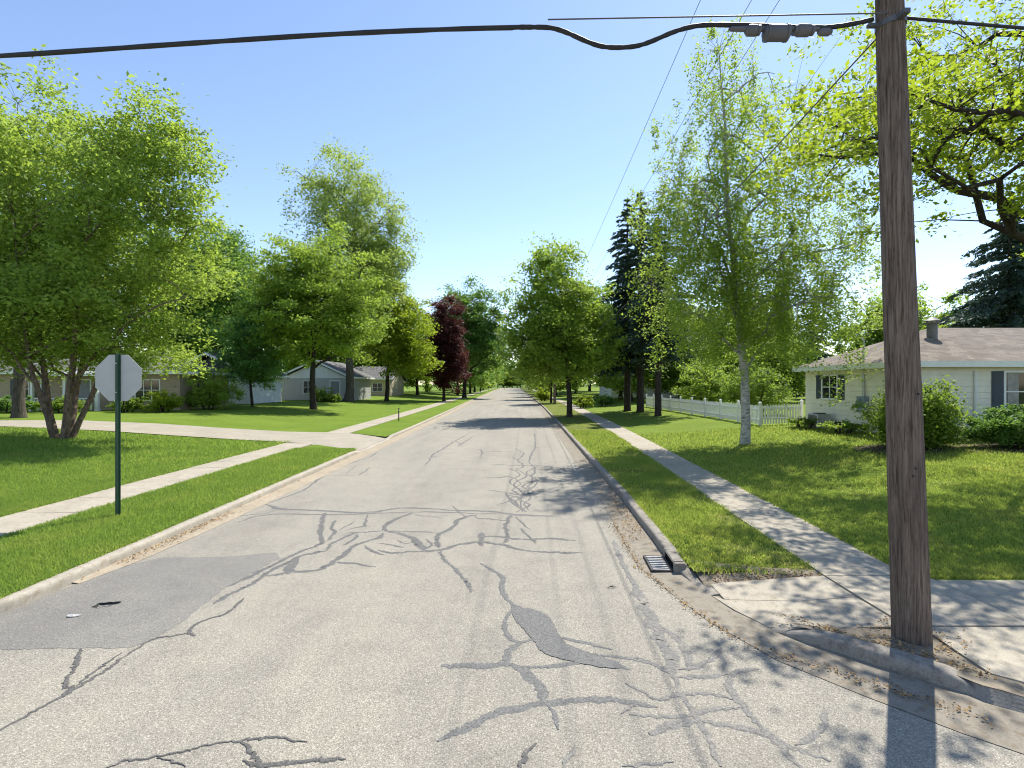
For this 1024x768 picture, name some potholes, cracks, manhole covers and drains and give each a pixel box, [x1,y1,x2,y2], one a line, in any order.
crack [424,433,539,512]
crack [0,598,346,768]
drain grate [643,548,686,573]
